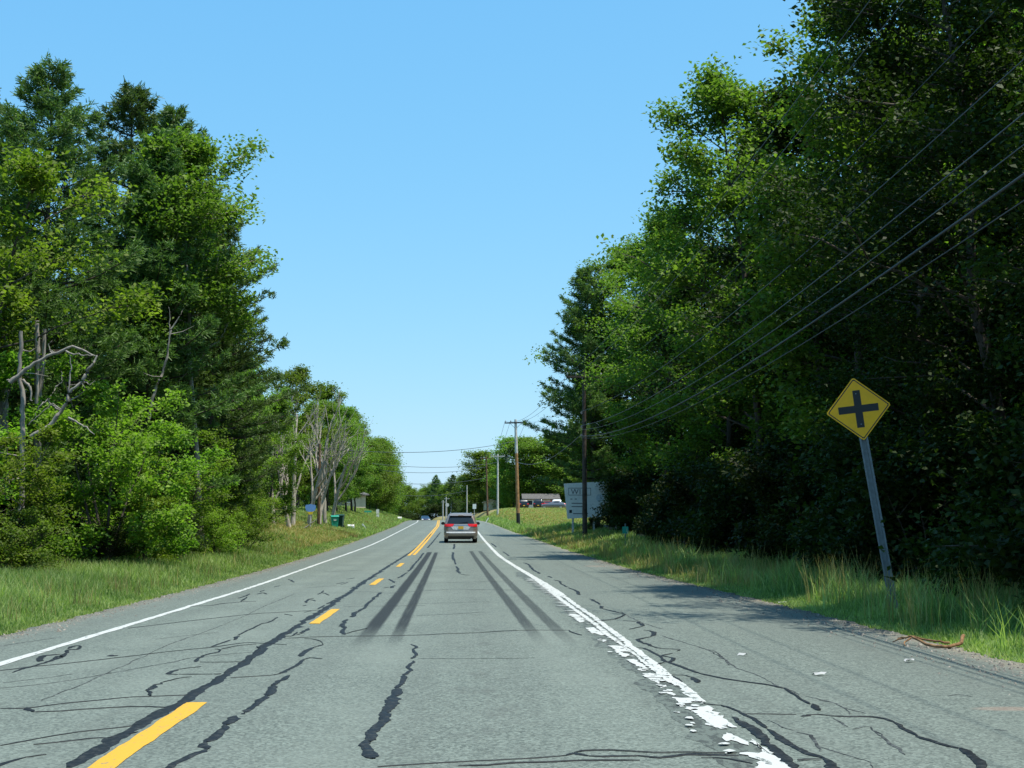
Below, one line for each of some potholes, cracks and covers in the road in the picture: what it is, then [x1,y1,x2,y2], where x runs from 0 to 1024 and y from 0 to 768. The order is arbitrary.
crack [377,749,753,767]
crack [622,612,906,768]
crack [0,569,581,766]
